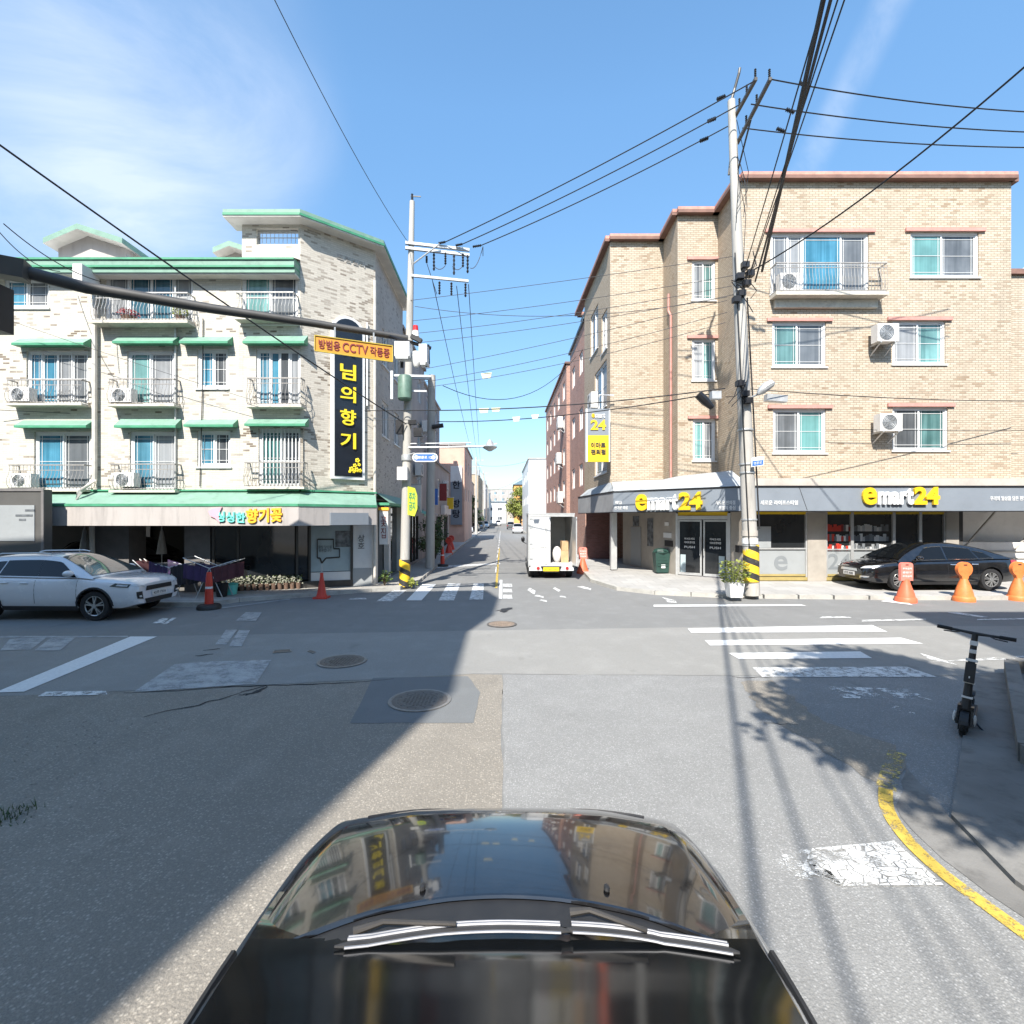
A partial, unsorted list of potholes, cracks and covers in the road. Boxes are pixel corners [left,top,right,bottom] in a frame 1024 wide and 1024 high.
manhole cover [388,689,451,712]
manhole cover [317,654,367,668]
crack [145,686,267,717]
